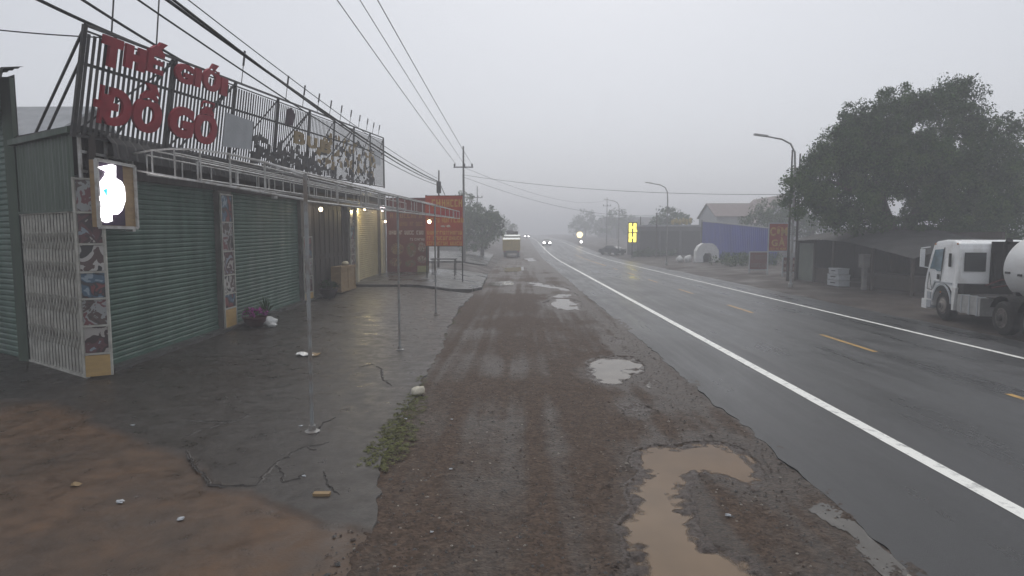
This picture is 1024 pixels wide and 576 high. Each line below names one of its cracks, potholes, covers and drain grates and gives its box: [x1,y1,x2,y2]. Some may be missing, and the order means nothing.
pothole [545,298,582,311]
pothole [613,440,769,576]
crack [361,364,392,386]
crack [182,413,340,495]
pothole [585,355,646,386]
